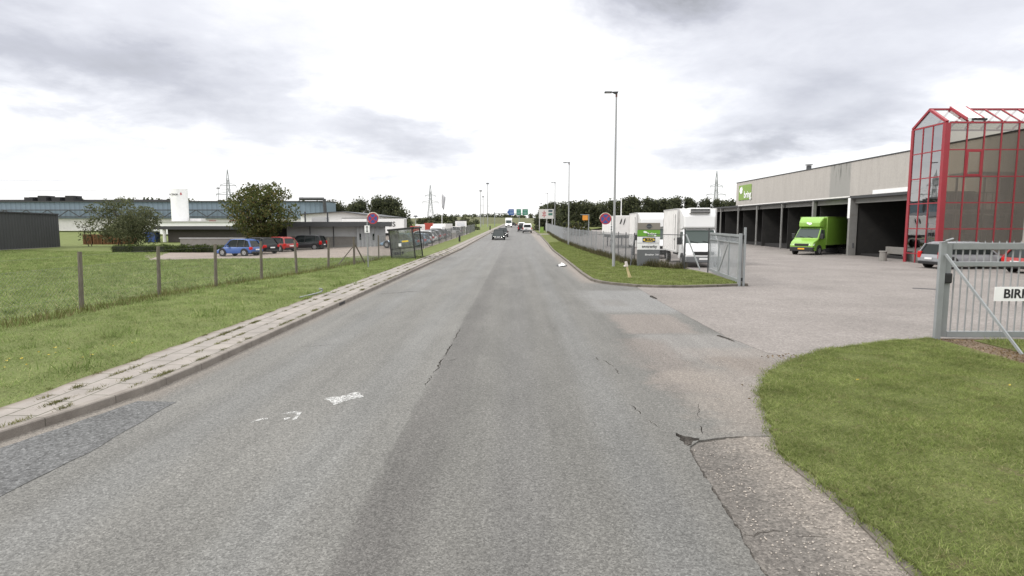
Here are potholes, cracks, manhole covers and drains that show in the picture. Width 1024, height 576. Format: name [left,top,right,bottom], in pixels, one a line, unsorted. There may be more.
pothole [676,433,700,446]
